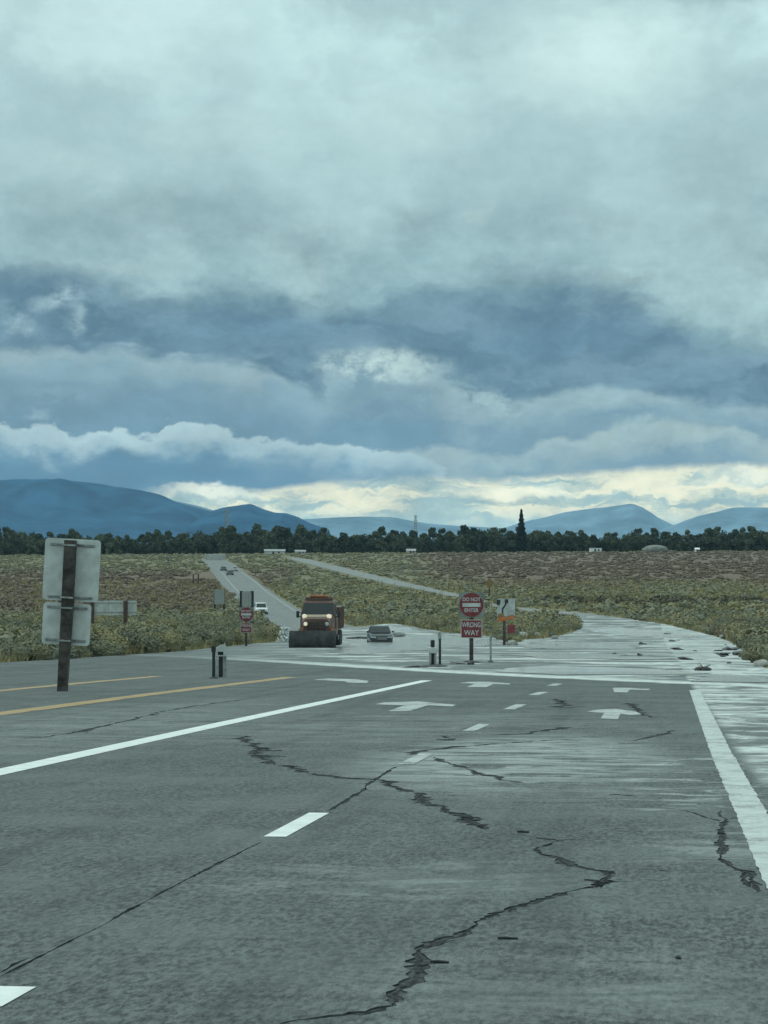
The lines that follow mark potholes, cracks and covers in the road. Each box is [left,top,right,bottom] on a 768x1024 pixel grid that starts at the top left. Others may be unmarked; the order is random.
crack [232,727,571,831]
crack [24,699,242,739]
crack [682,810,763,893]
crack [281,834,665,1024]
crack [602,703,675,741]
crack [551,699,584,708]
